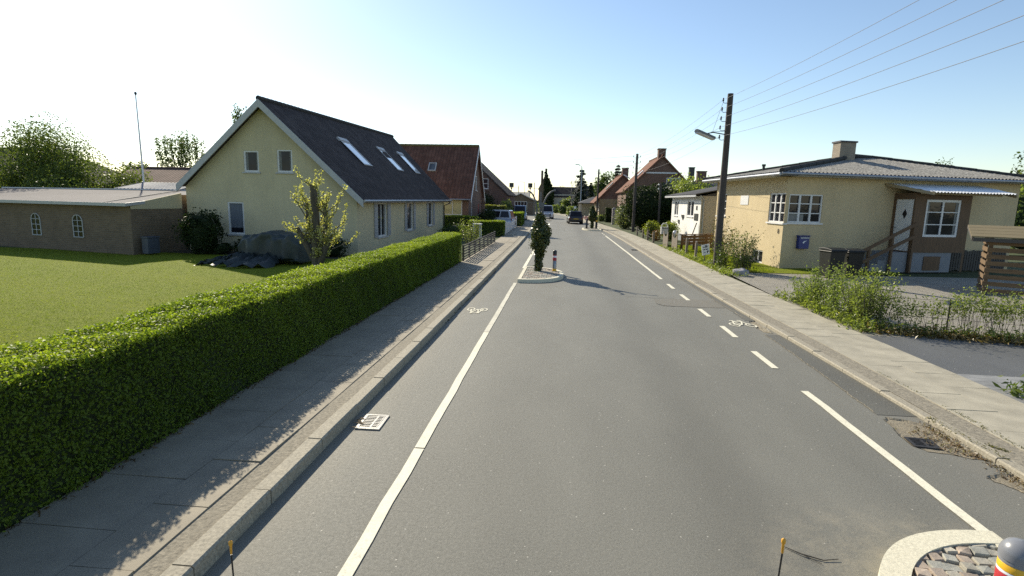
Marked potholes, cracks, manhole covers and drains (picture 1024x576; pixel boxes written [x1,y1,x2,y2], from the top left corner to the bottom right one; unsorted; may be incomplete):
drain grate [355,414,390,431]
drain grate [903,437,943,450]
pothole [884,417,984,460]
